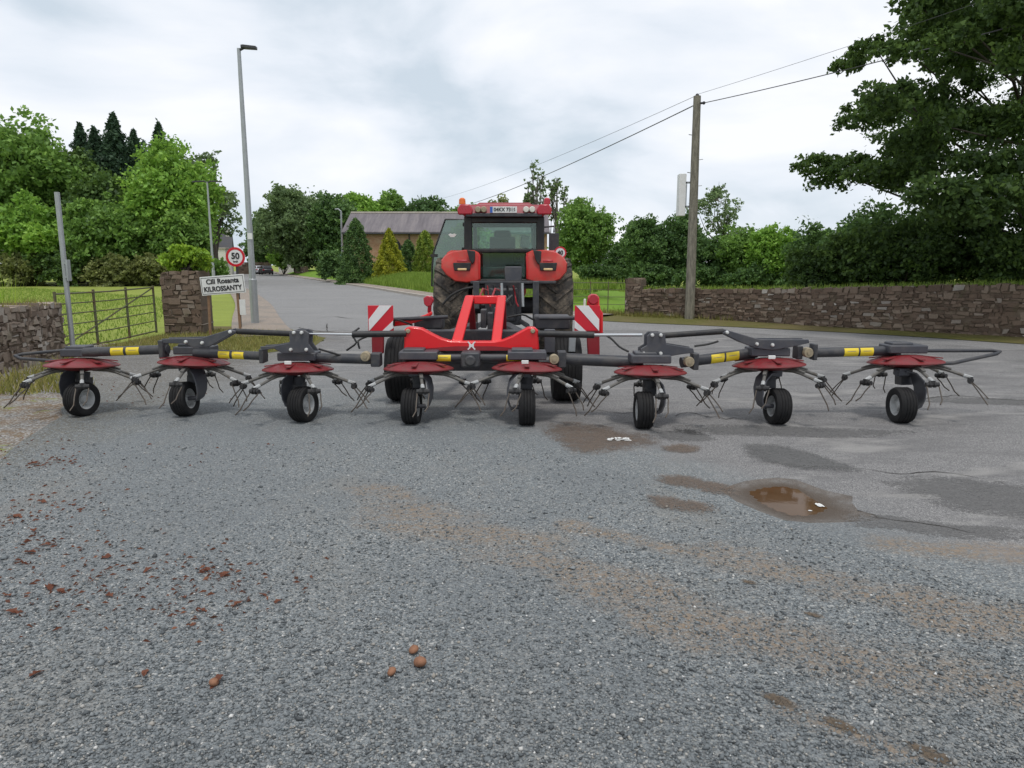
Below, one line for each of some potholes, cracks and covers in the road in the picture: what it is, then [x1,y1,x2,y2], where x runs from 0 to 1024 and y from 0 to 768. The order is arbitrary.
pothole [722,478,881,523]
